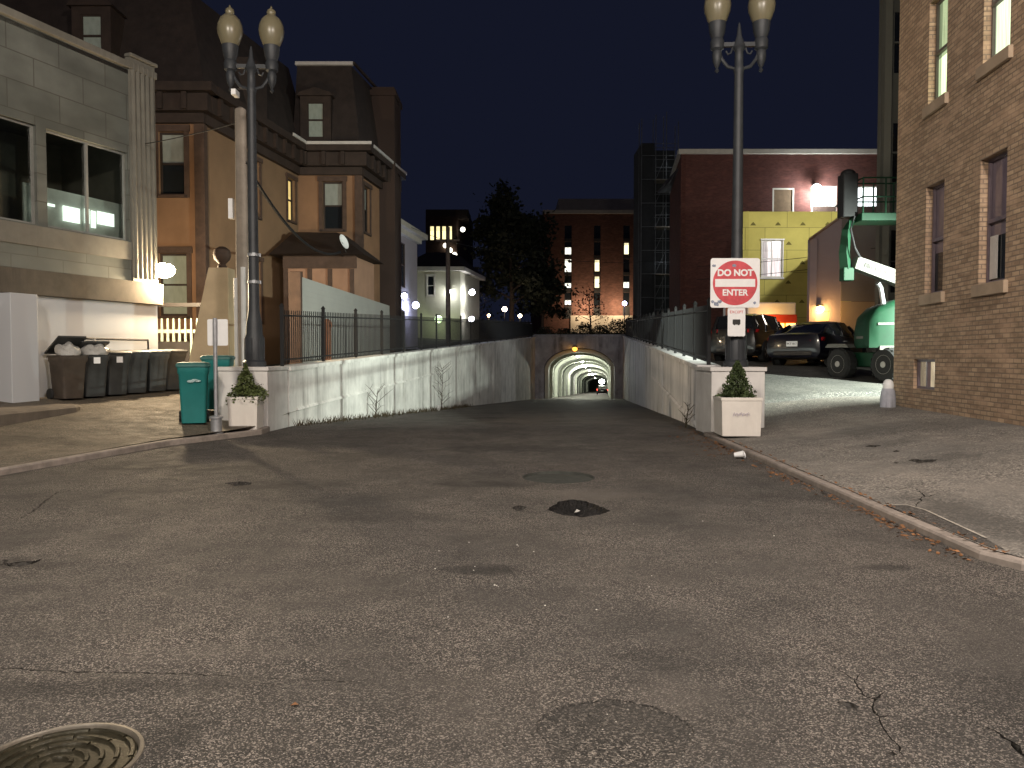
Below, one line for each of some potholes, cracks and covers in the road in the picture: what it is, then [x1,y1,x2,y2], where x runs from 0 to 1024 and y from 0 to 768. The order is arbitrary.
crack [831,665,904,756]
manhole cover [0,723,145,768]
pothole [0,559,41,567]
pothole [548,500,610,517]
